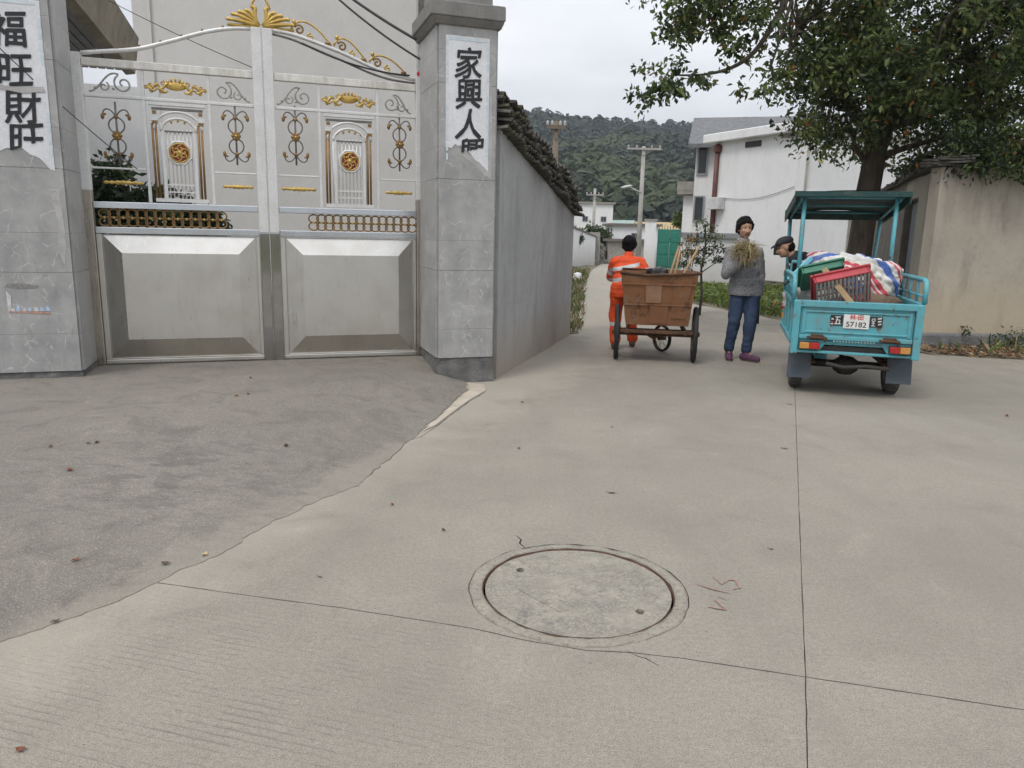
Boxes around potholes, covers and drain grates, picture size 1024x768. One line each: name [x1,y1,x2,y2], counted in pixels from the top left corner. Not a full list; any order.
manhole cover [467,544,689,665]
